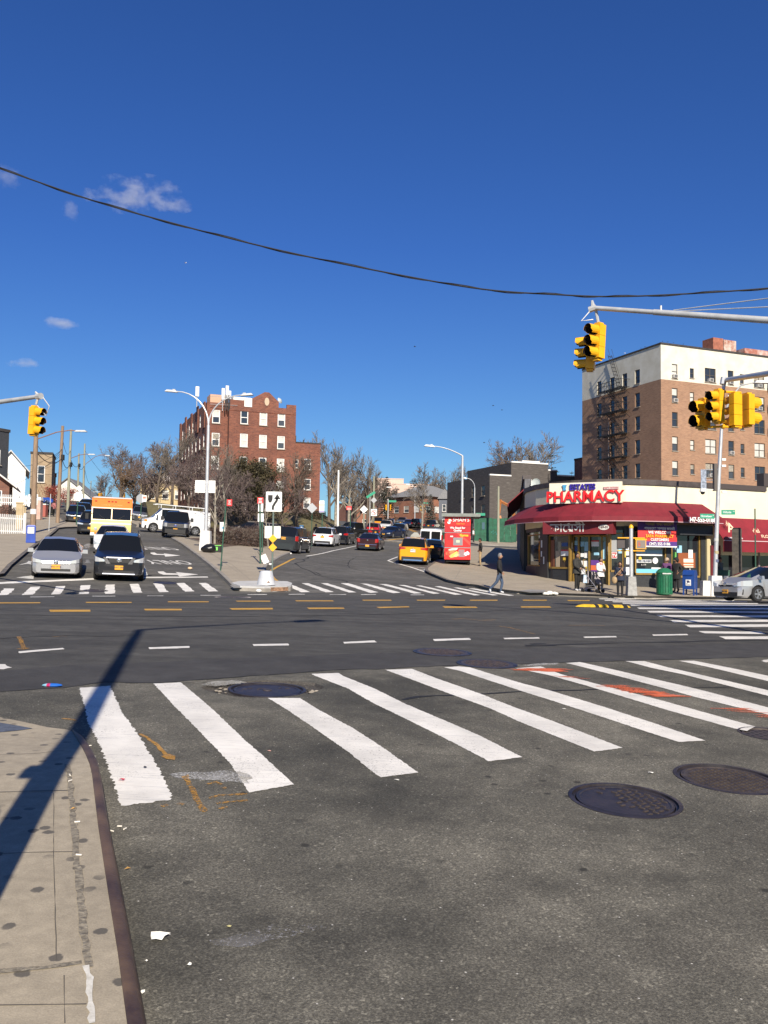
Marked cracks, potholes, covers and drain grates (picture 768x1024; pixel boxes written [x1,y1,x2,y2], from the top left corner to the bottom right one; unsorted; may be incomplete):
manhole cover [737,727,768,740]
manhole cover [673,763,768,795]
manhole cover [568,783,684,819]
manhole cover [456,659,518,669]
manhole cover [413,648,472,656]
manhole cover [228,682,306,698]
